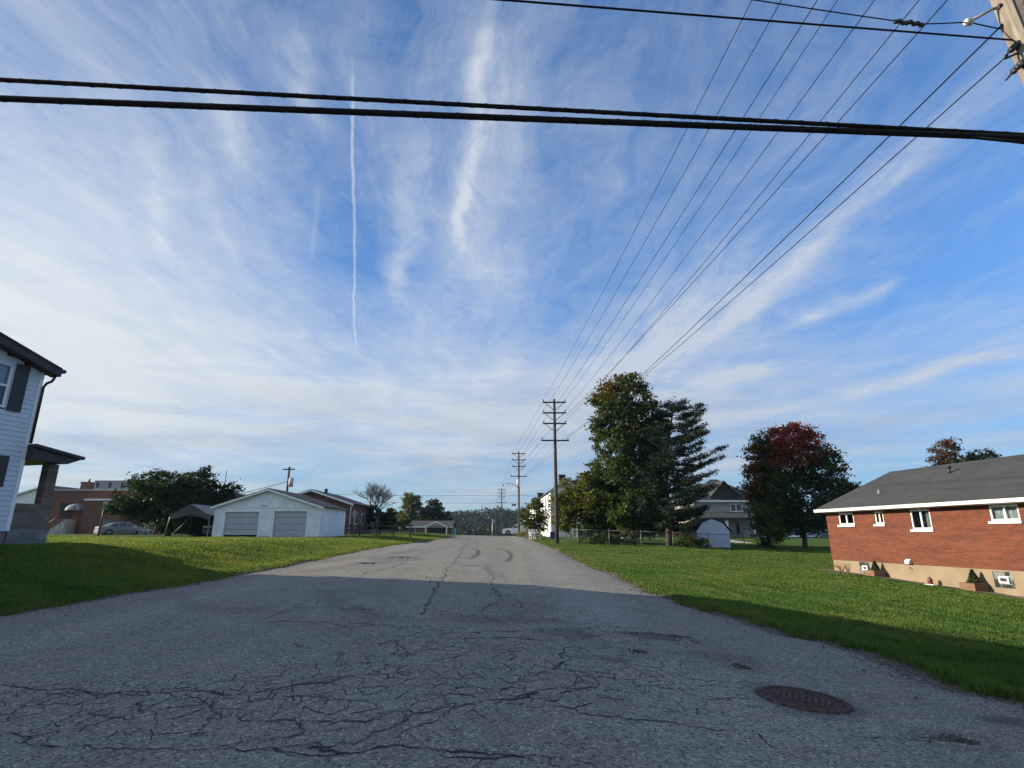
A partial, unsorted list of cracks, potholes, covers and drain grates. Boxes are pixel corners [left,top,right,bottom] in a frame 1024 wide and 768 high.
crack [0,549,780,768]
manhole cover [756,685,854,715]
